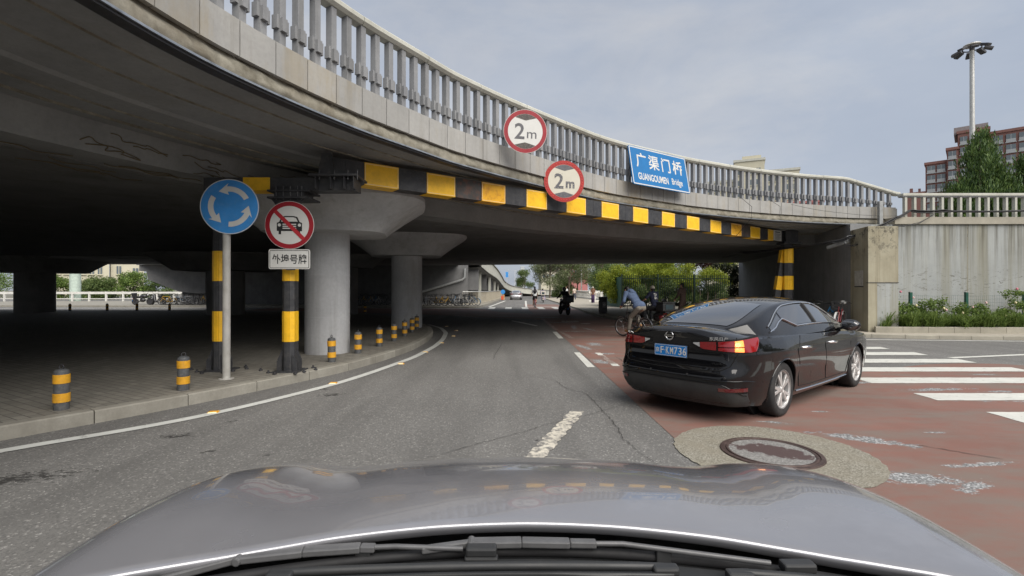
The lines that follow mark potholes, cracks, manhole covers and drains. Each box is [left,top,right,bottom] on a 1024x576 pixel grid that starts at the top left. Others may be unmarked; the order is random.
manhole cover [720,437,827,470]
crack [424,345,653,461]
